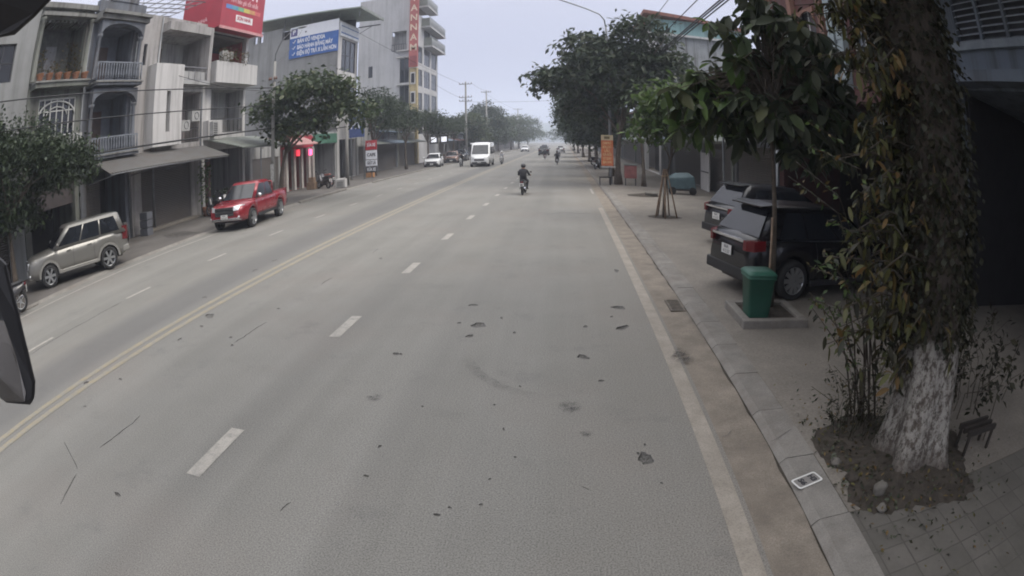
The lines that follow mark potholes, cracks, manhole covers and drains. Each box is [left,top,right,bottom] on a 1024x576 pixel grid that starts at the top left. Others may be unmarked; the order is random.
pothole [638,451,654,465]
drain grate [664,299,686,312]
